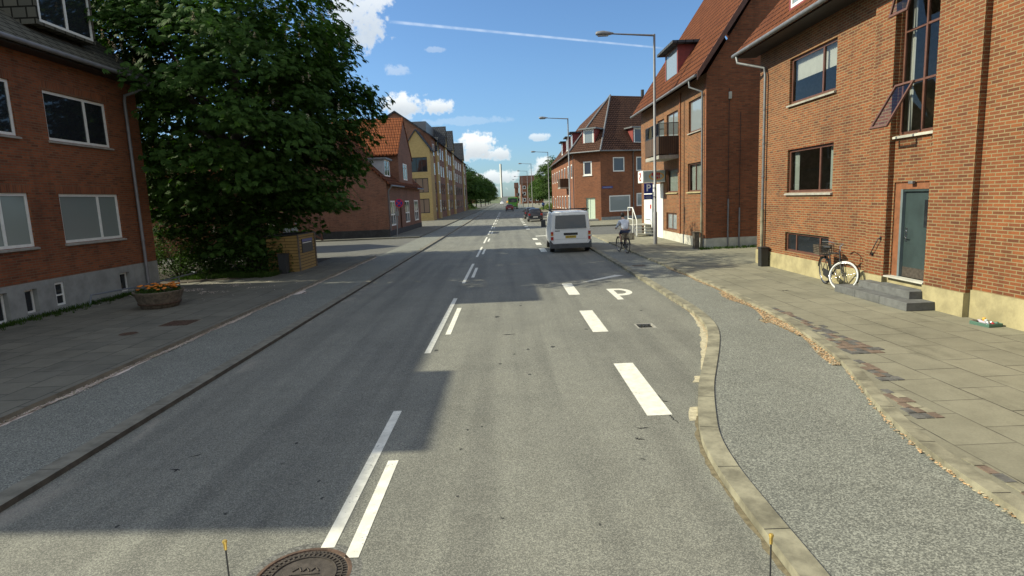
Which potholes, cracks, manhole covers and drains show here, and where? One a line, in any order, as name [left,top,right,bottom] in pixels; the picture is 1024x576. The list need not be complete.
manhole cover [247,543,362,576]
manhole cover [155,319,203,327]
